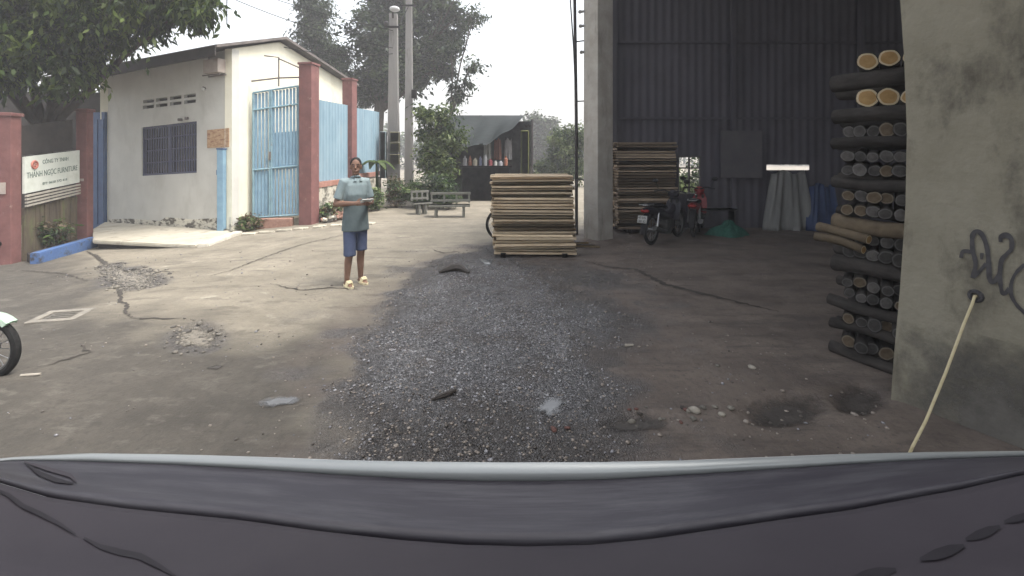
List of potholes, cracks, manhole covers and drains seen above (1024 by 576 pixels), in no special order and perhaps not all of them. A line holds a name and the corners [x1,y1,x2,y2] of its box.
crack [39,343,91,367]
pothole [163,317,228,356]
crack [586,261,777,311]
crack [87,251,174,319]
pothole [86,261,173,293]
